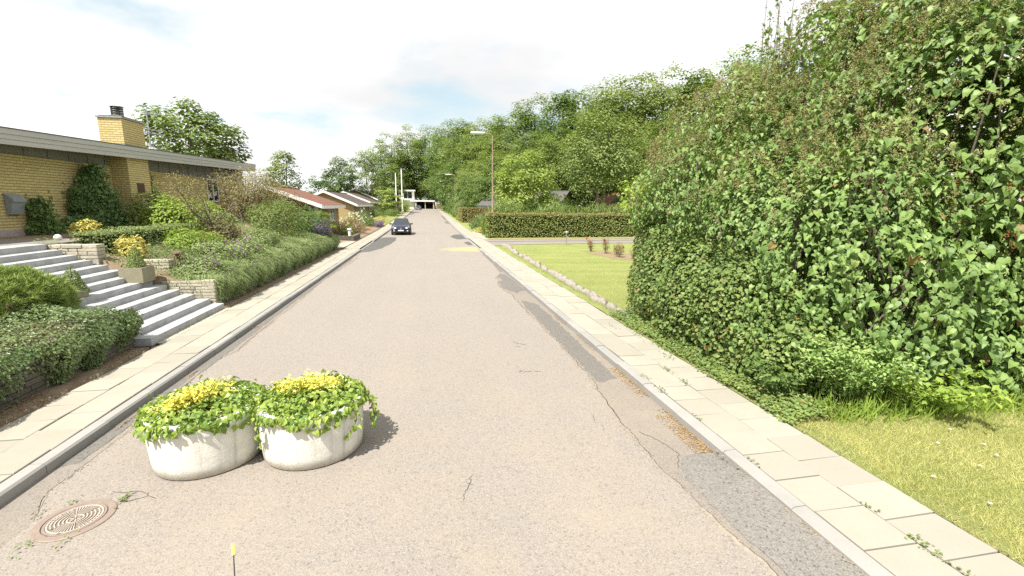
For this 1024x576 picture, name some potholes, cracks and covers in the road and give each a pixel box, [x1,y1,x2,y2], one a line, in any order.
crack [495,277,778,576]
manhole cover [30,499,117,543]
